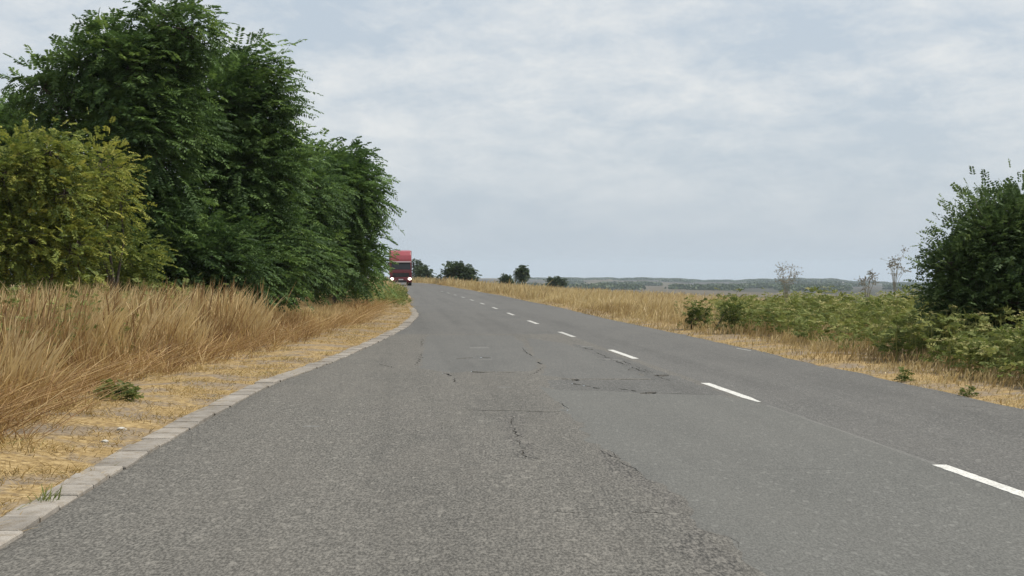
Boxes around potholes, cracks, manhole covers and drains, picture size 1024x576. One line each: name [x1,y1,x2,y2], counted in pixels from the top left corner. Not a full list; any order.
crack [580,347,704,395]
crack [481,402,569,459]
crack [443,357,512,382]
